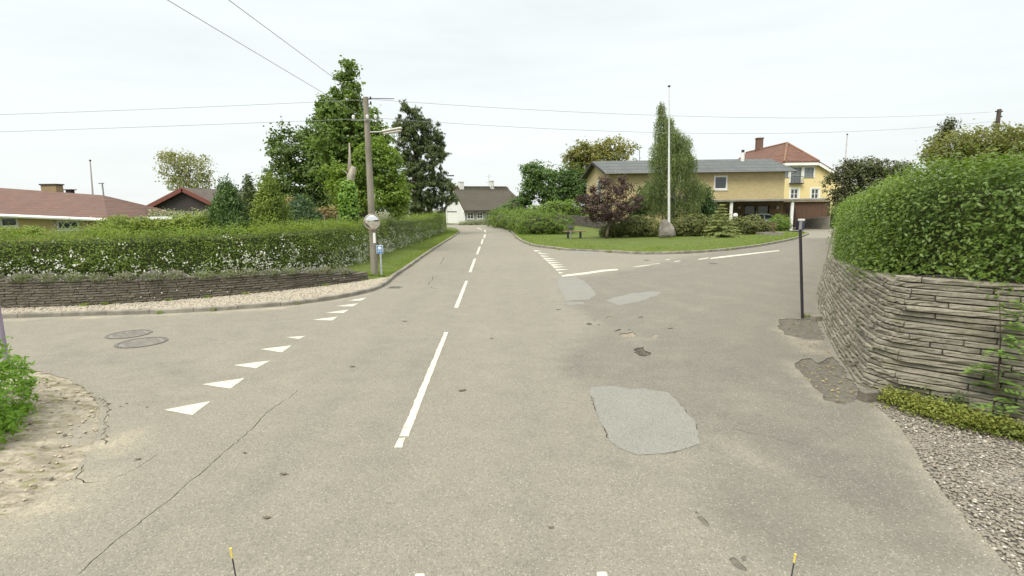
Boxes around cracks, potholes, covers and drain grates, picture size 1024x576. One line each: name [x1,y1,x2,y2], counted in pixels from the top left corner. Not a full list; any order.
pothole [794,357,859,405]
manhole cover [105,329,153,339]
pothole [729,557,747,572]
crack [83,390,298,570]
pothole [778,319,825,340]
manhole cover [114,337,168,348]
